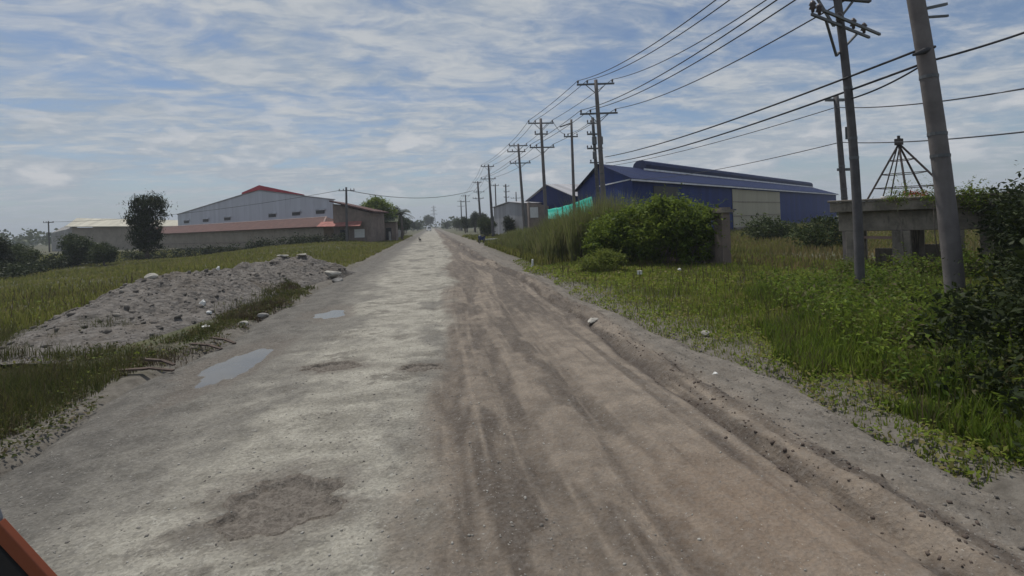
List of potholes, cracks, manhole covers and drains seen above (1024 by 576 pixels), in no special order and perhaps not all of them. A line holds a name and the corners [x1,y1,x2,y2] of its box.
pothole [299,361,363,373]
pothole [203,473,348,541]
pothole [399,363,443,372]
